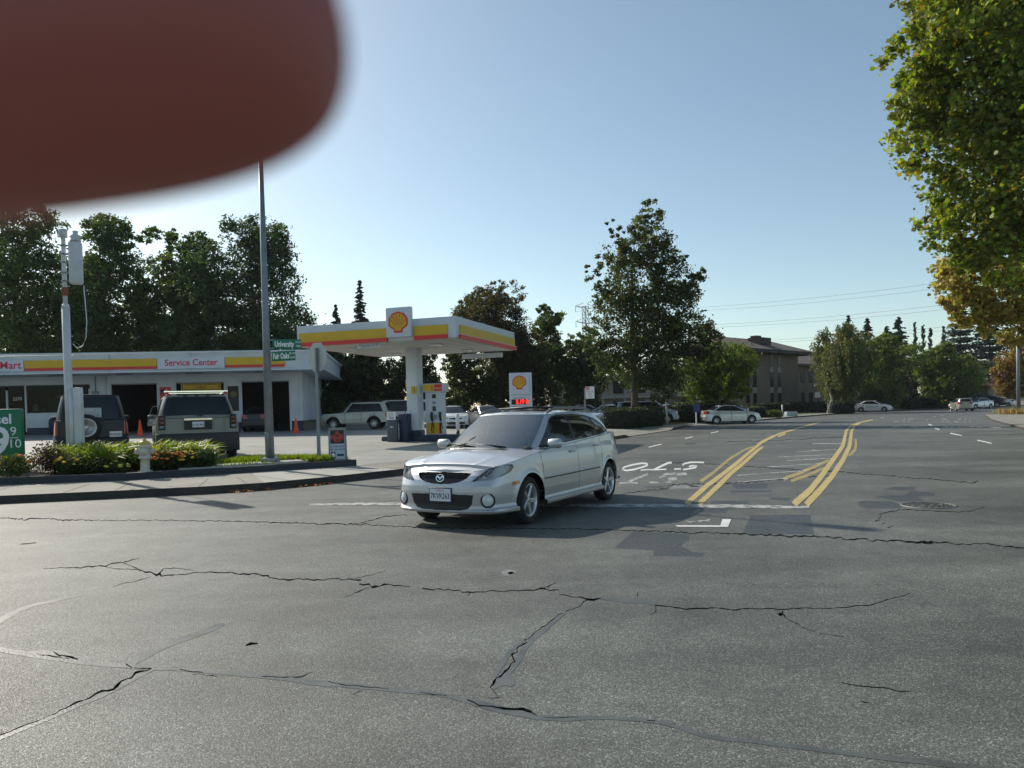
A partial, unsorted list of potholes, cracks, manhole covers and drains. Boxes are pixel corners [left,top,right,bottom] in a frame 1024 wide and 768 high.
crack [875,507,984,528]
crack [45,558,558,596]
